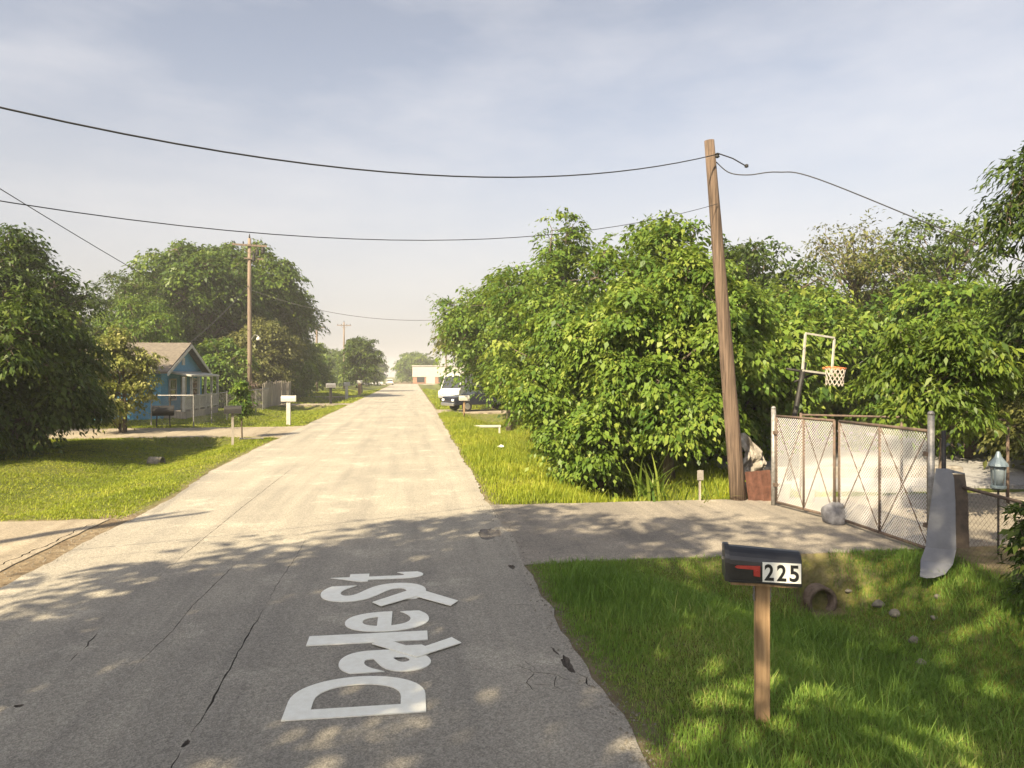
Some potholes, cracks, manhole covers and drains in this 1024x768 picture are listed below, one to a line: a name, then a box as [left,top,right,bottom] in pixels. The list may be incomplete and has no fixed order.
crack [522,647,588,692]
crack [129,570,229,672]
crack [171,541,305,768]
pothole [478,529,501,540]
pothole [561,655,575,673]
